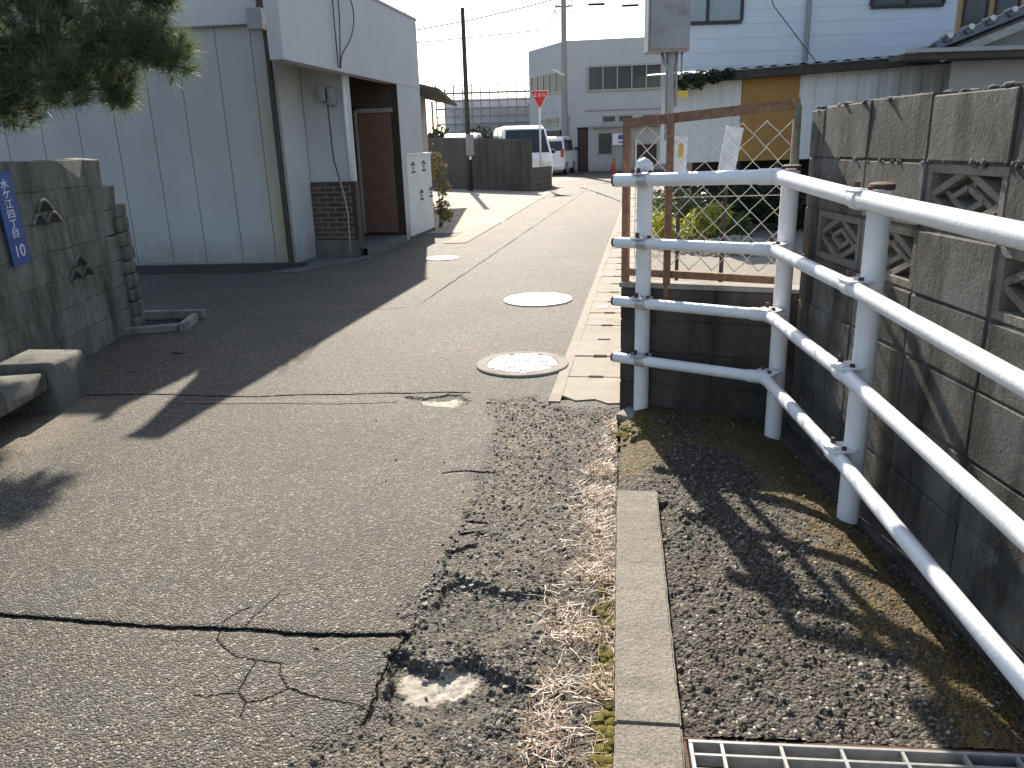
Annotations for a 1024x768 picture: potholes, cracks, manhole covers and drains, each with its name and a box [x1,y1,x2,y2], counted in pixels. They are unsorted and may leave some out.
drain grate [683,737,1024,768]
manhole cover [504,293,572,307]
pothole [377,646,538,742]
pothole [402,393,472,408]
manhole cover [476,351,569,378]
crack [0,593,409,726]
